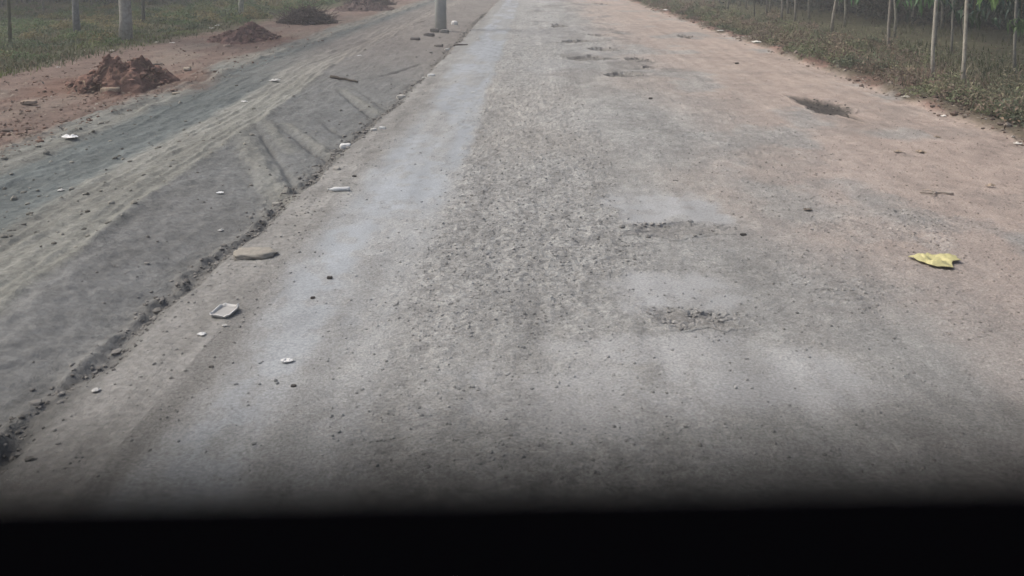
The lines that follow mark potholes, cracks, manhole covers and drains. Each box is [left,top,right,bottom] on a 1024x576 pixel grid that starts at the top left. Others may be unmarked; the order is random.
pothole [635,305,751,333]
pothole [611,219,737,241]
pothole [601,70,644,78]
pothole [564,54,620,62]
pothole [781,93,875,125]
